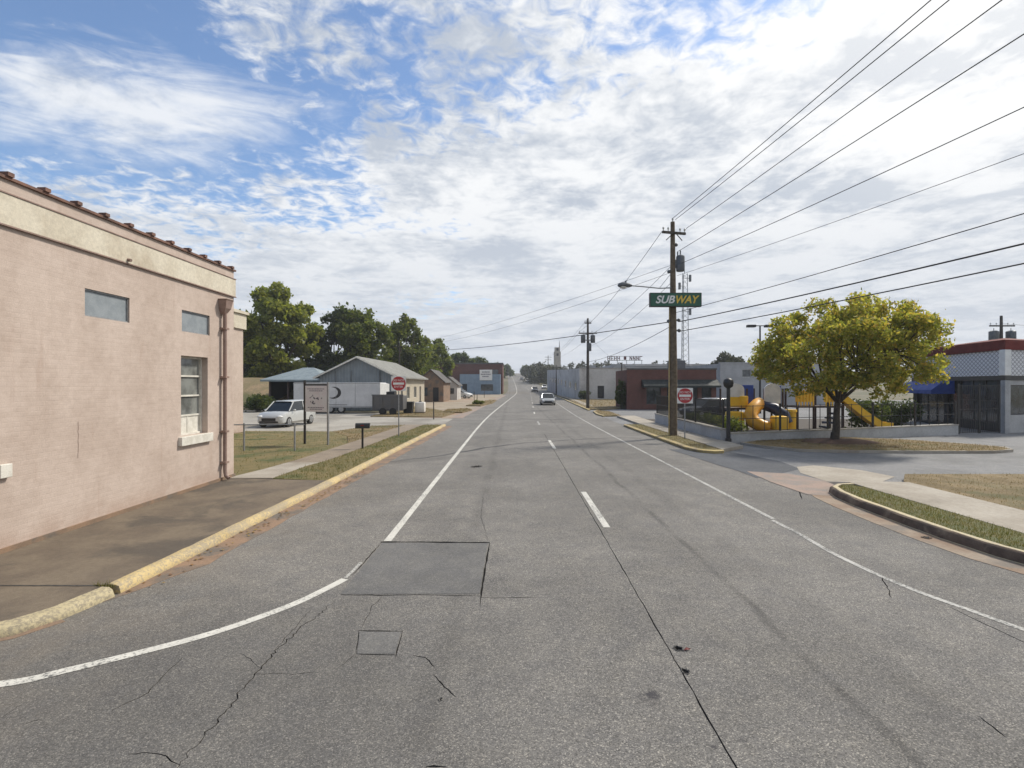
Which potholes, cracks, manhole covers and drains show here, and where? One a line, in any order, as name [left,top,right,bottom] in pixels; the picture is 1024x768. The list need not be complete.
crack [341,630,455,696]
crack [136,604,331,768]
